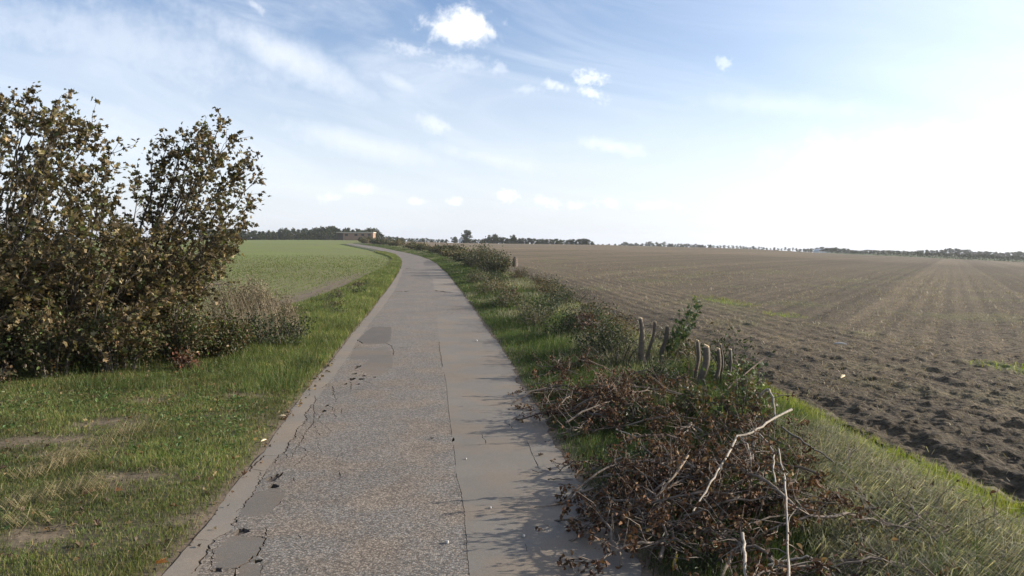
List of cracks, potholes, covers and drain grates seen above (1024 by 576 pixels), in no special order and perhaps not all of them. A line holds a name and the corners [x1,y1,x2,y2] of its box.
crack [193,370,369,576]
